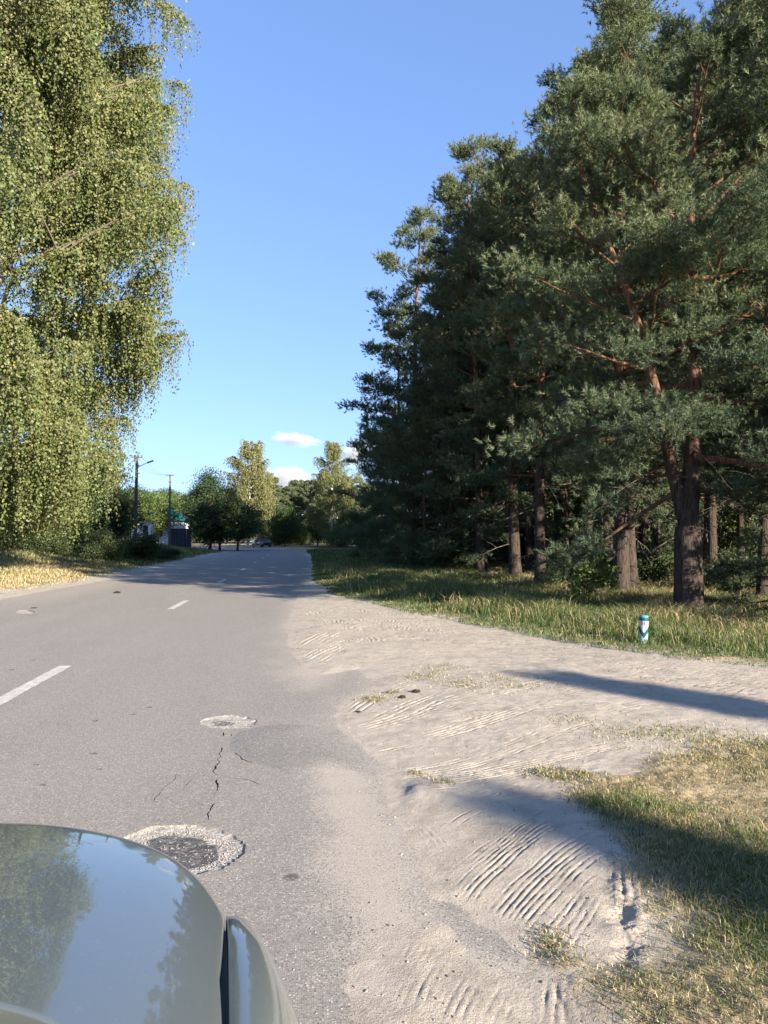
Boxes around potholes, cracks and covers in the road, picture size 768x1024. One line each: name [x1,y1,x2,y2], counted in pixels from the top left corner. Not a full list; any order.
pothole [189,713,268,732]
pothole [110,818,267,884]
crack [144,731,280,823]
